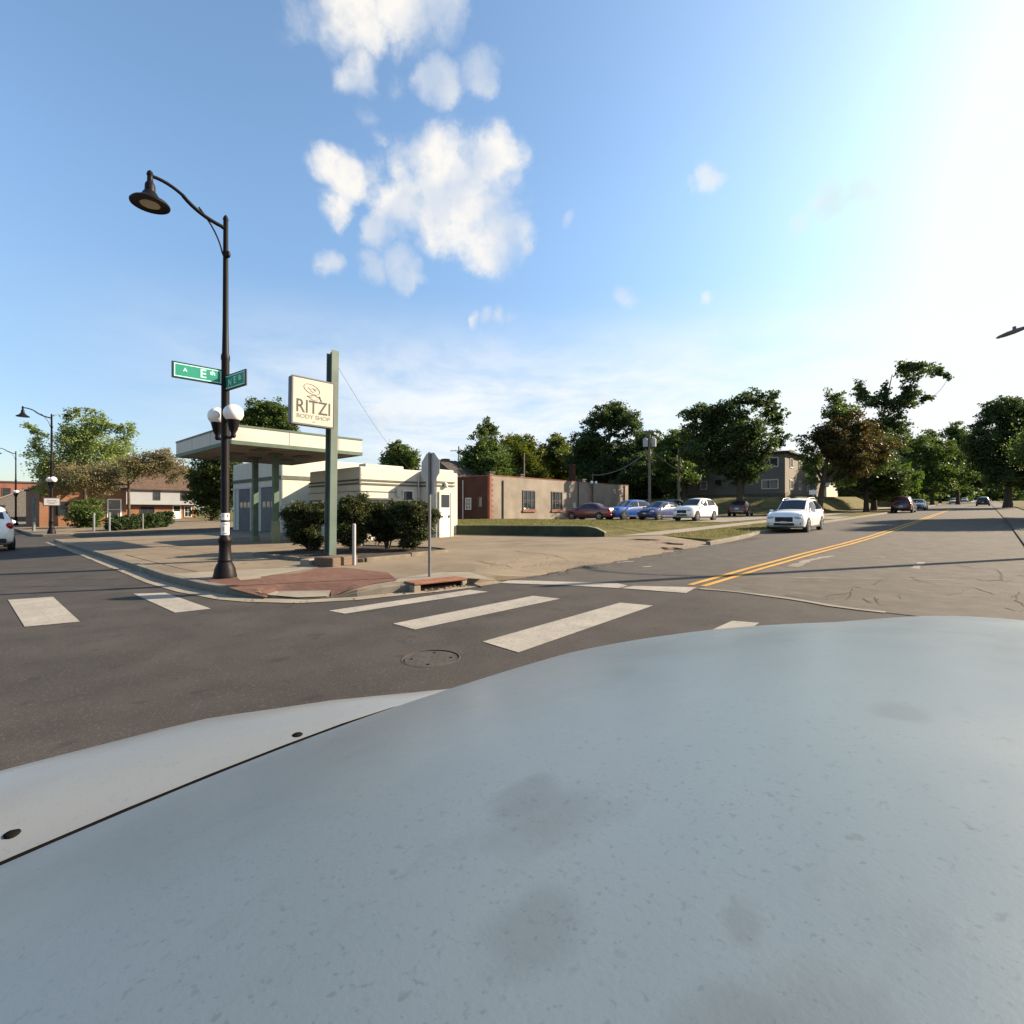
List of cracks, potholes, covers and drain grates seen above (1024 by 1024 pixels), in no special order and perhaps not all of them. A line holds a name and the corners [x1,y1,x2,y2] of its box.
crack [825,565,1024,611]
manhole cover [401,649,461,667]
drain grate [404,576,468,593]
